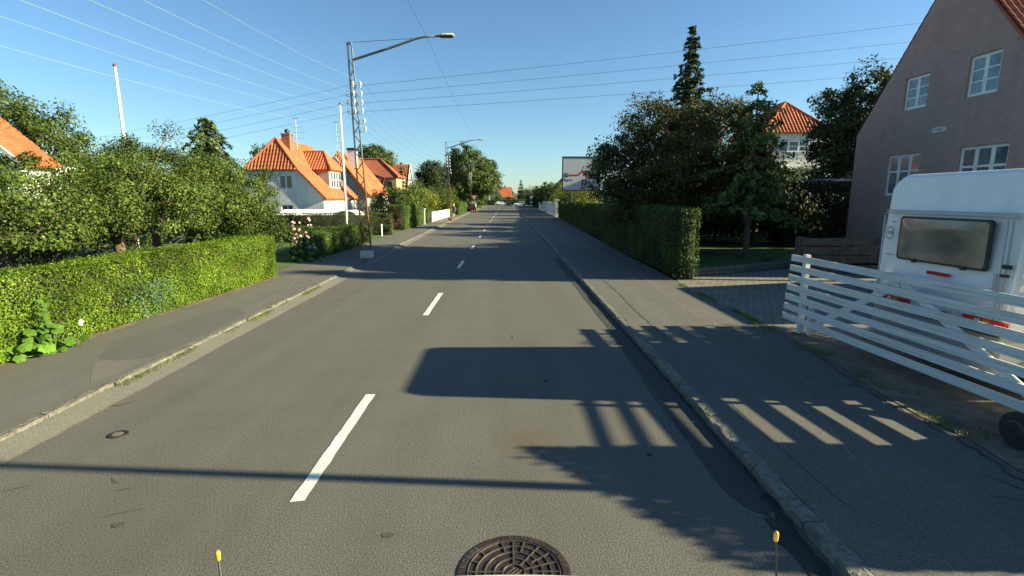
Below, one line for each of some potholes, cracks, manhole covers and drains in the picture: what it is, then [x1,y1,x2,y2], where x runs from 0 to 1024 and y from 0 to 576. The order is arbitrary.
utility cover [107,430,129,439]
manhole cover [456,535,571,576]
